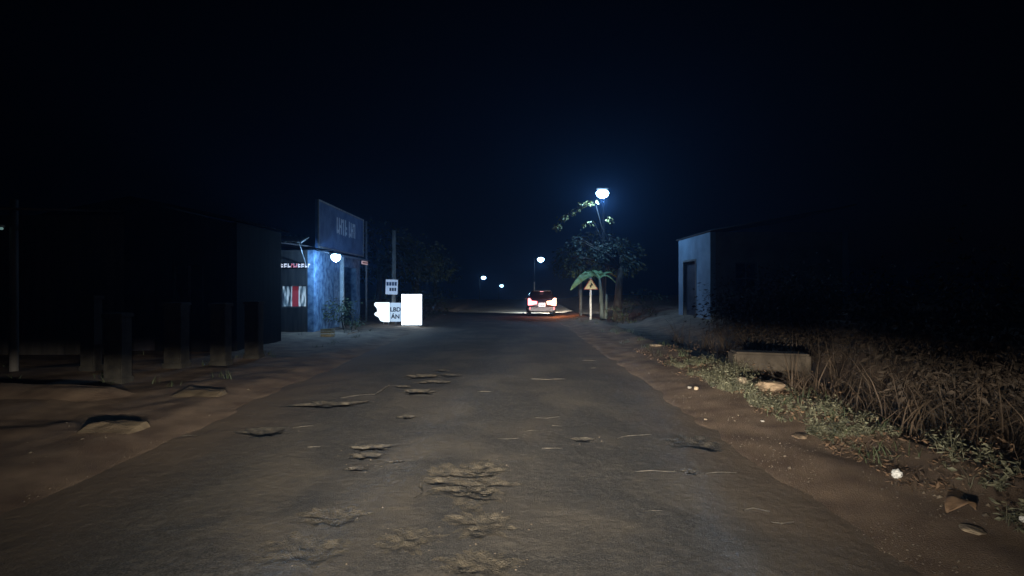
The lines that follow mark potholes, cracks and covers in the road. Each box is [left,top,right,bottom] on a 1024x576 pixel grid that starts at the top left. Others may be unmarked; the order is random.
pothole [661,433,724,452]
pothole [295,506,373,528]
pothole [441,511,521,542]
pothole [418,458,526,514]
pothole [279,400,374,409]
pothole [432,549,528,576]
pothole [372,527,450,556]
pothole [348,452,385,461]
